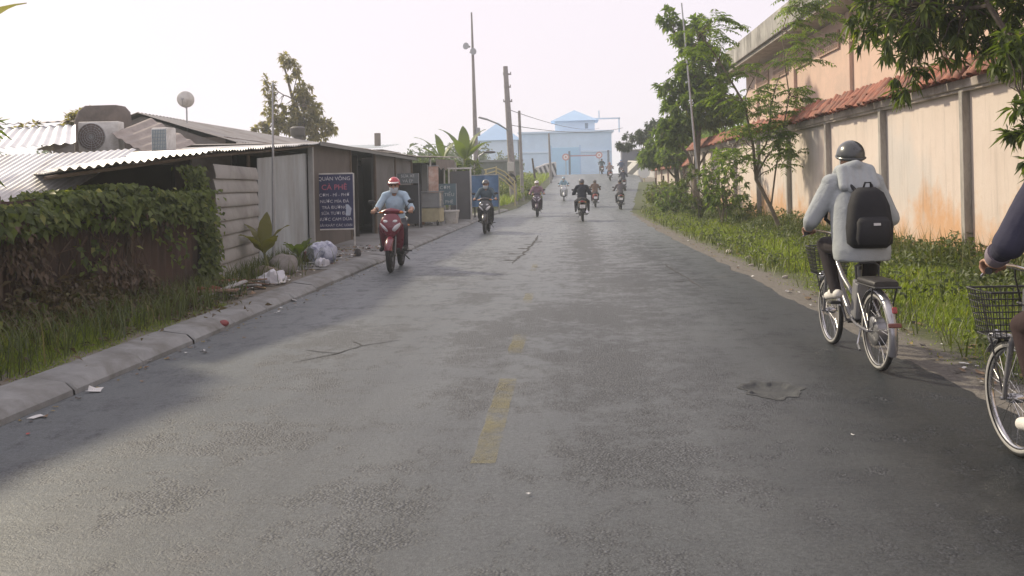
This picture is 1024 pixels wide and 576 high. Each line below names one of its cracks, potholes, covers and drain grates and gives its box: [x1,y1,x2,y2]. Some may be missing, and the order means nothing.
crack [292,340,396,363]
crack [508,235,543,264]
